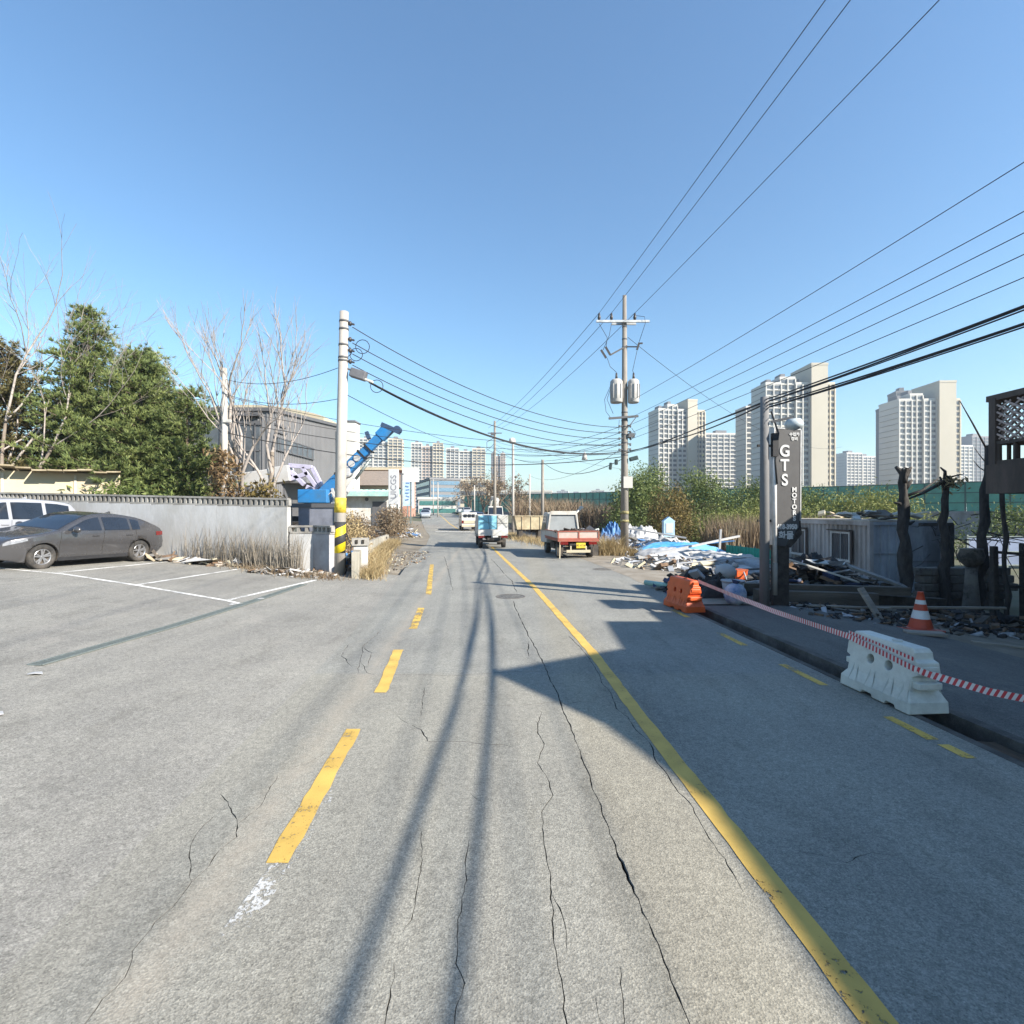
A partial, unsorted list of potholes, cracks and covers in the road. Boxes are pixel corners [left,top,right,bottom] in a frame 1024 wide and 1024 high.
crack [571,638,743,891]
crack [795,850,893,863]
crack [482,701,576,1024]
crack [454,841,469,1024]
crack [84,779,277,1024]
crack [343,633,378,675]
crack [402,829,423,933]
crack [354,689,504,745]
